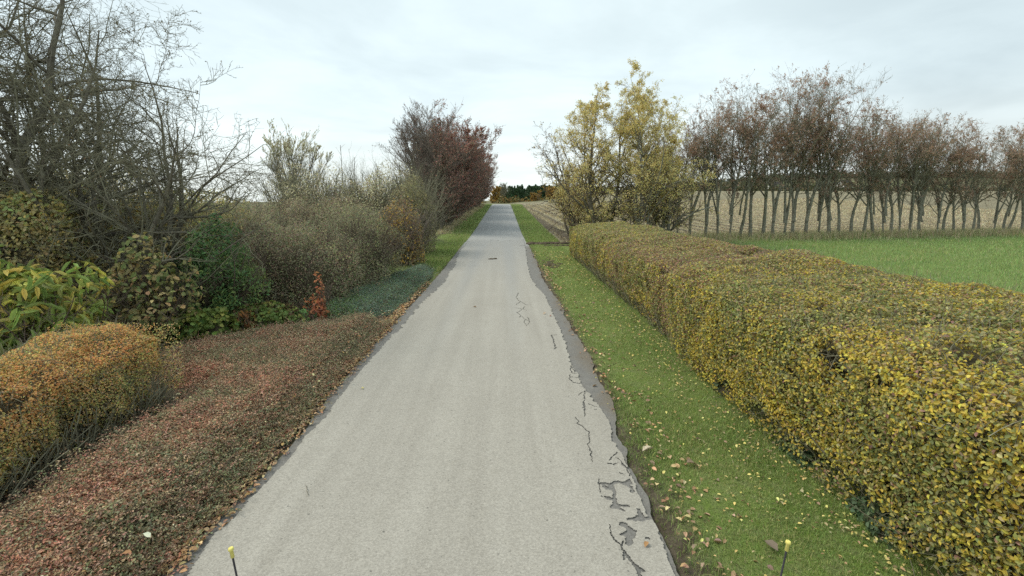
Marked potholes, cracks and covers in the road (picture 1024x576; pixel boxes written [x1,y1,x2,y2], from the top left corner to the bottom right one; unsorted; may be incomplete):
pothole [619,522,637,546]
crack [551,335,631,497]
crack [609,524,646,576]
